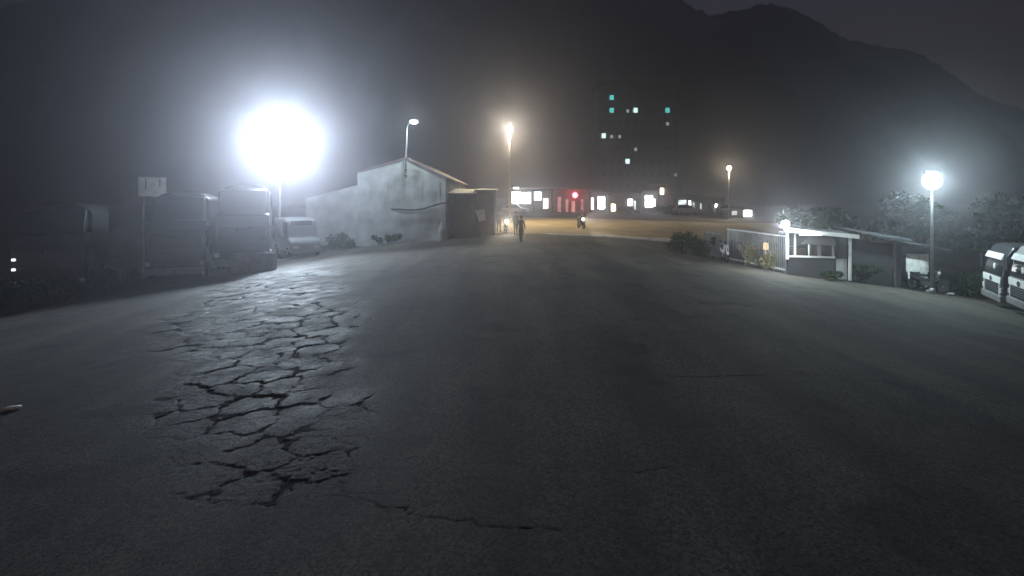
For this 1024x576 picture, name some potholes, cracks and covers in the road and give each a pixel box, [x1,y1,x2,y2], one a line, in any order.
crack [153,273,370,506]
